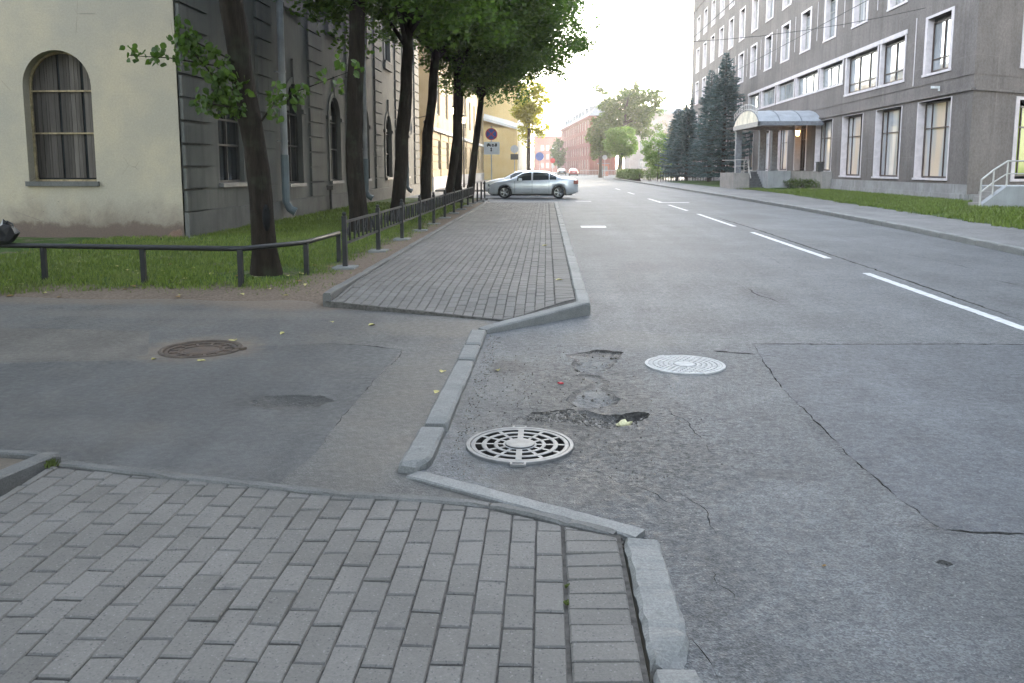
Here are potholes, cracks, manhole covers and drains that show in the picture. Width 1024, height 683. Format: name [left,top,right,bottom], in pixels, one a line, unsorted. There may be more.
manhole cover [158,340,247,358]
crack [716,343,1024,535]
manhole cover [645,355,726,375]
pothole [565,374,621,408]
pothole [565,350,624,373]
pothole [521,409,650,429]
